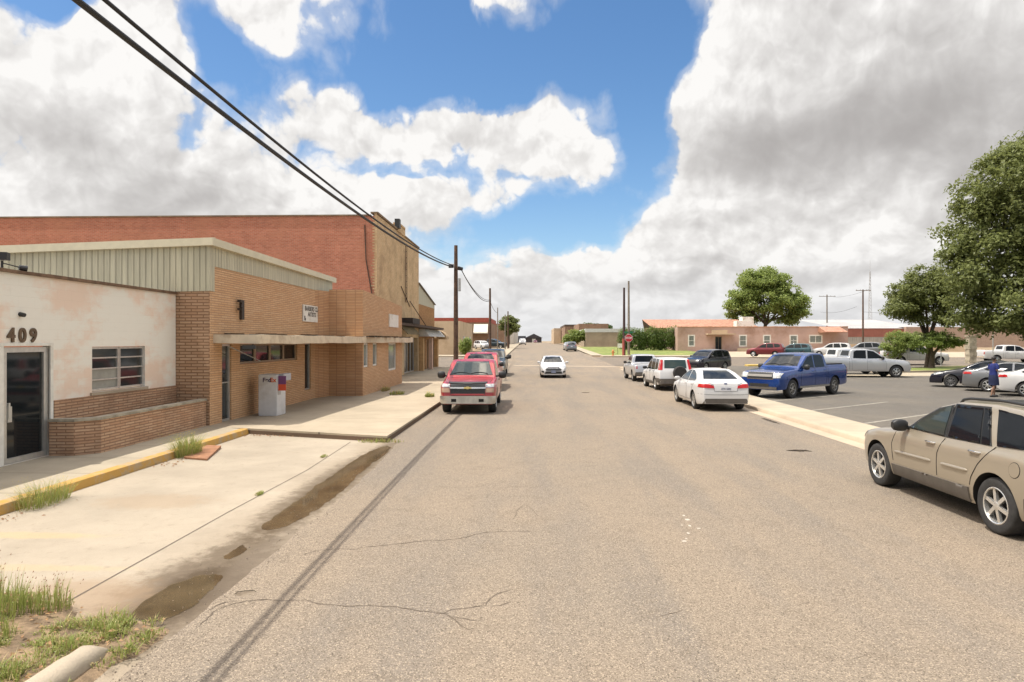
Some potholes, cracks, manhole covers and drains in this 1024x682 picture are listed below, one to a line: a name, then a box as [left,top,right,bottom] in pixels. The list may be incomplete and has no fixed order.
crack [200,590,508,631]
crack [303,505,543,555]
